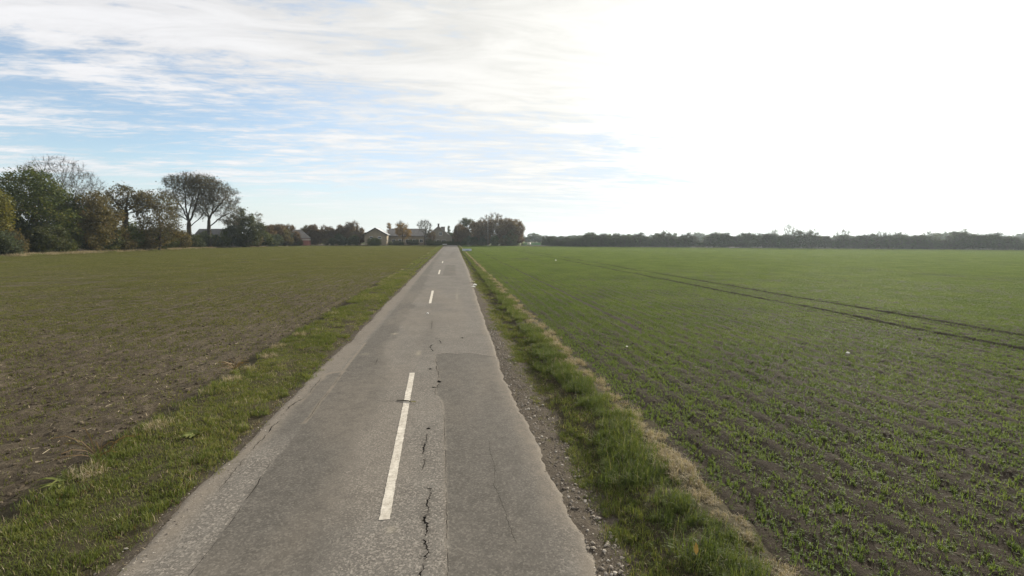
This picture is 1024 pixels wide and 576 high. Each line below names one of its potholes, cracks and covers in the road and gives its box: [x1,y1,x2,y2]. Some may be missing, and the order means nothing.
crack [419,419,448,576]
